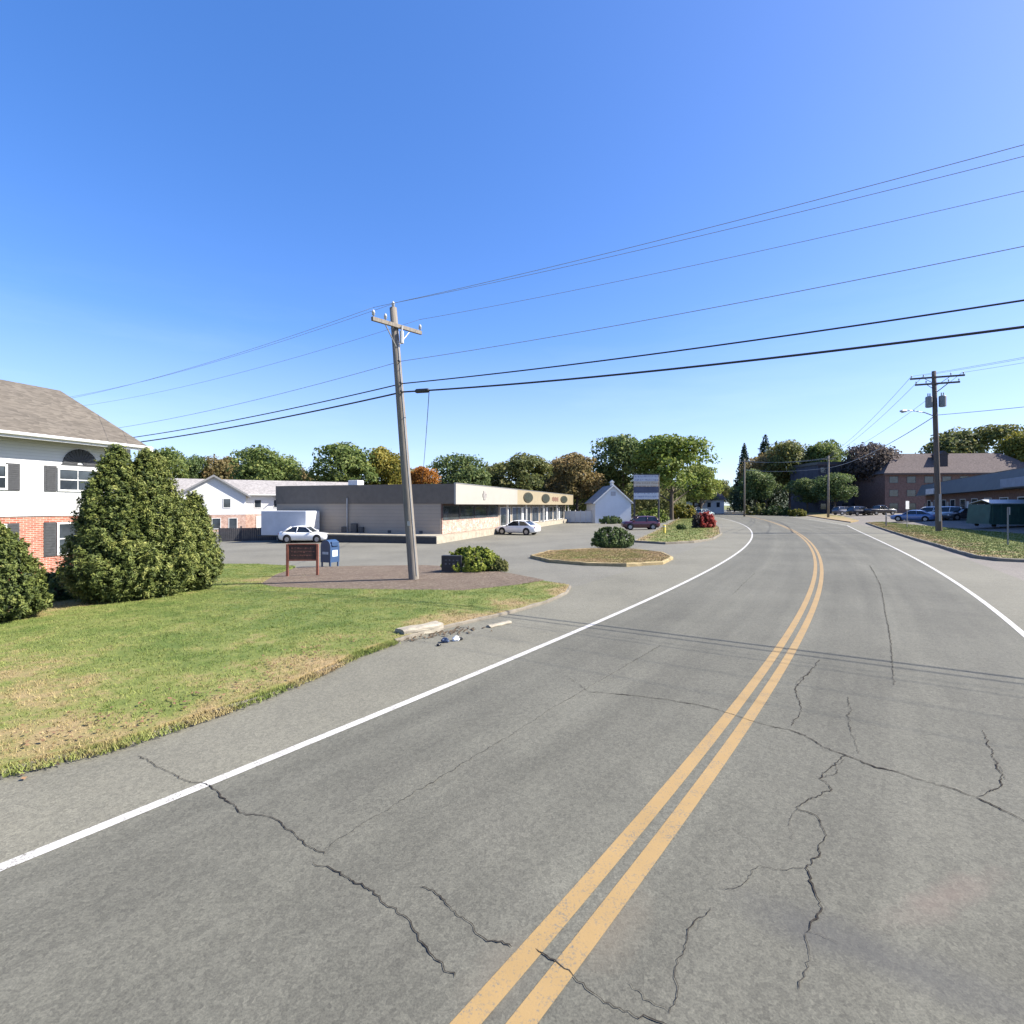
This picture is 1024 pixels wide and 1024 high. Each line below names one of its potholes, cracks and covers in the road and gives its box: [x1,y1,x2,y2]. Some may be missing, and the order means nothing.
crack [141,756,512,975]
crack [537,908,711,1024]
crack [570,660,1023,989]
crack [869,565,896,684]
